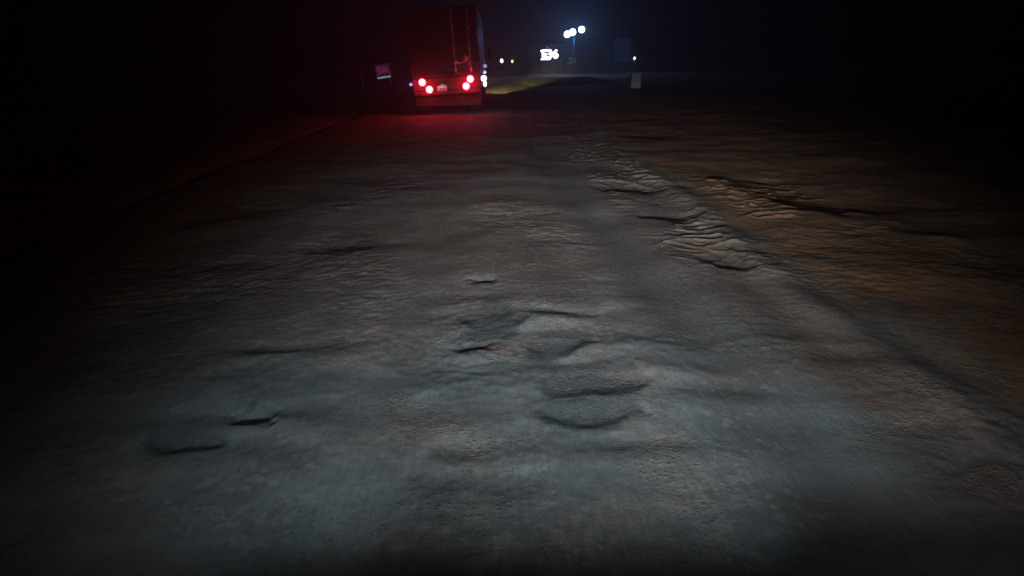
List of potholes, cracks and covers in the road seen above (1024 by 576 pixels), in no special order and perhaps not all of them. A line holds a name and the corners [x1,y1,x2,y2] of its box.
pothole [454,333,505,355]
pothole [230,396,283,429]
pothole [463,272,501,286]
pothole [444,298,533,350]
pothole [110,411,236,459]
pothole [515,353,660,400]
pothole [534,396,656,435]
